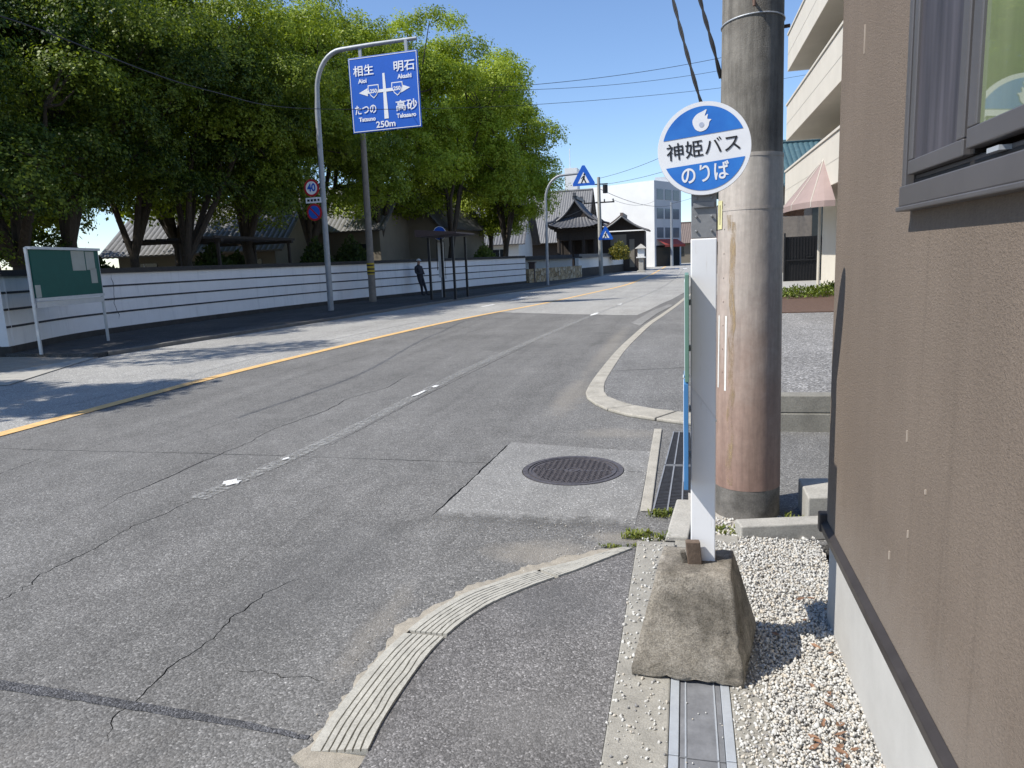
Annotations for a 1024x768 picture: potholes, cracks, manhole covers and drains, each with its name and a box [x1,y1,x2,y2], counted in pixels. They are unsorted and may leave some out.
manhole cover [523,456,624,486]
drain grate [652,465,691,515]
crack [4,494,206,599]
crack [0,378,489,508]
crack [236,669,321,681]
crack [107,579,298,736]
drain grate [664,431,691,466]
